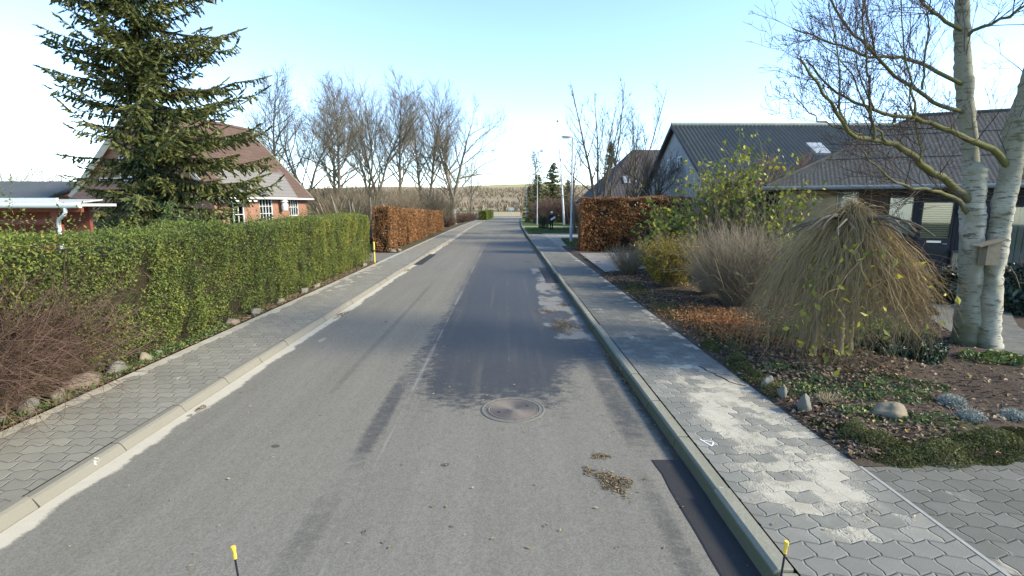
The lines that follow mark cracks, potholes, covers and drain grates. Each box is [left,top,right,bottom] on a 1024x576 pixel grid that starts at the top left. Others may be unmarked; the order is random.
manhole cover [481,397,545,423]
